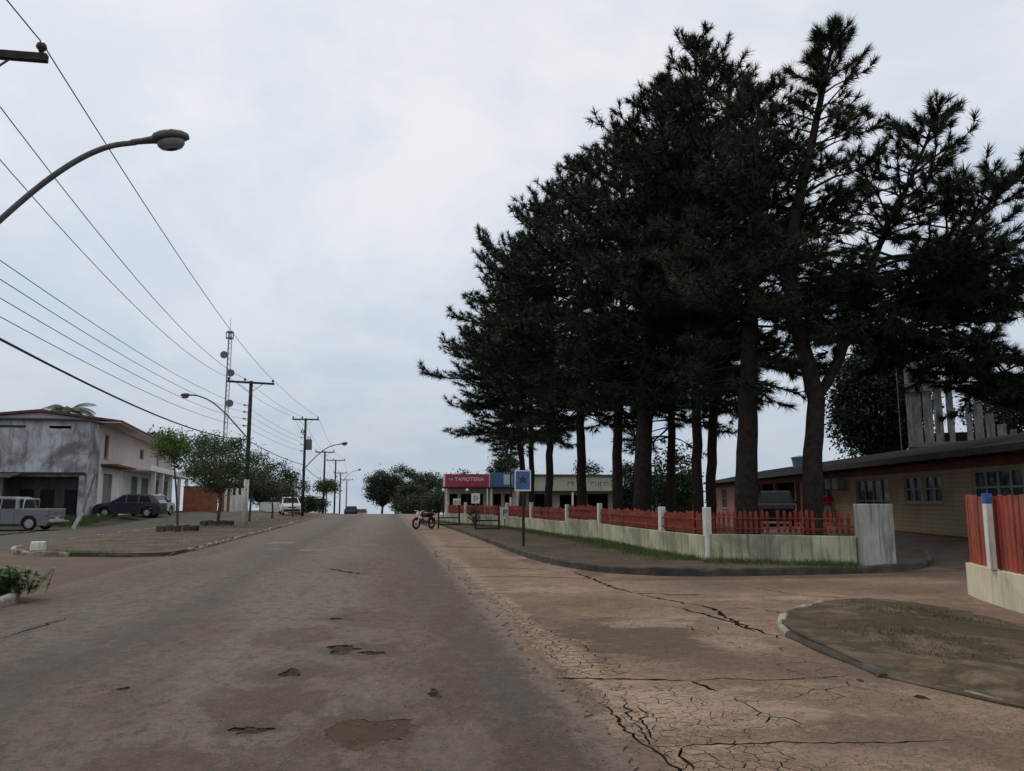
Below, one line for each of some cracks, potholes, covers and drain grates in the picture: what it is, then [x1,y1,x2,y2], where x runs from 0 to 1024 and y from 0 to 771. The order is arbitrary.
pothole [326,645,361,655]
crack [490,594,952,771]
pothole [228,726,274,734]
pothole [278,668,302,677]
